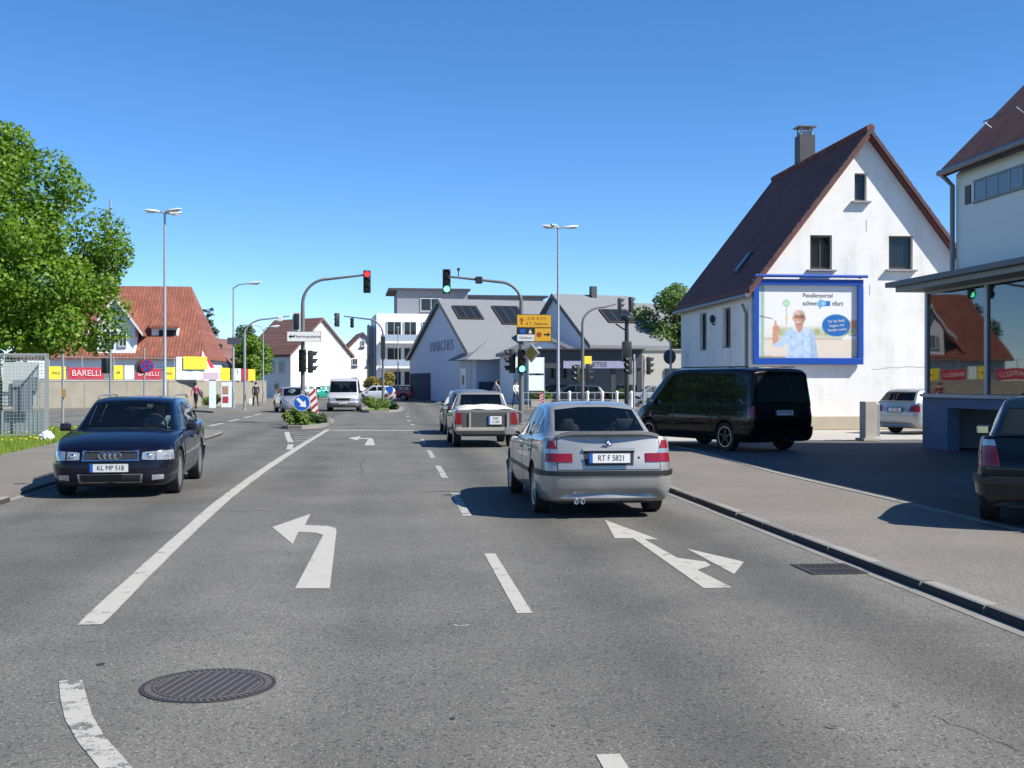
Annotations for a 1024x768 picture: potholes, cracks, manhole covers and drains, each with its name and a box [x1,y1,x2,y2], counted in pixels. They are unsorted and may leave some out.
drain grate [791,563,869,575]
crack [933,715,1020,751]
manhole cover [139,668,276,703]
